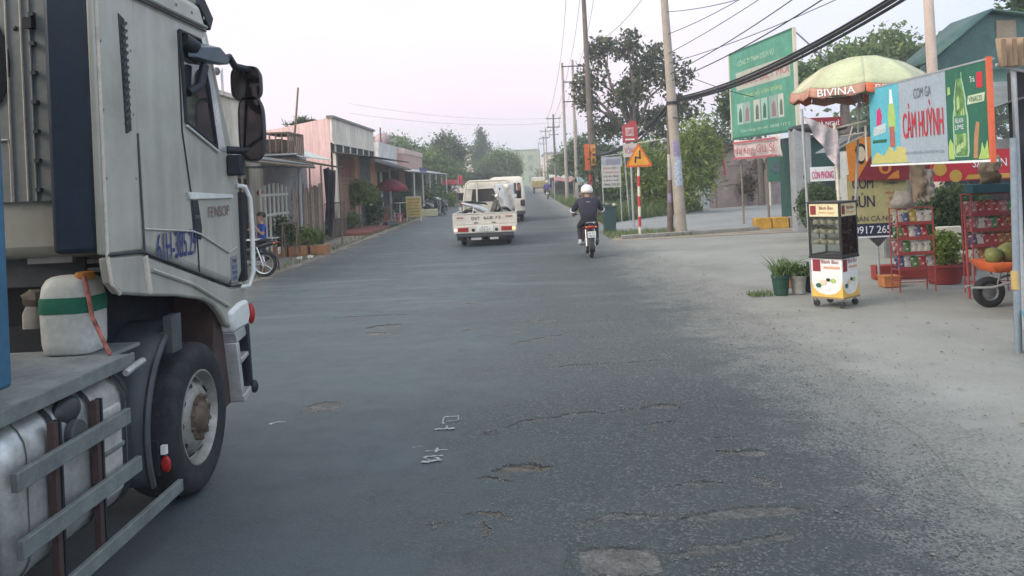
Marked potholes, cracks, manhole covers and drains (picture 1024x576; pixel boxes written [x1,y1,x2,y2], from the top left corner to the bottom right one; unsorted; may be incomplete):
crack [576,512,795,575]
pothole [302,401,343,413]
pothole [491,462,553,473]
crack [483,408,680,434]
crack [560,359,661,367]
crack [516,319,564,344]
